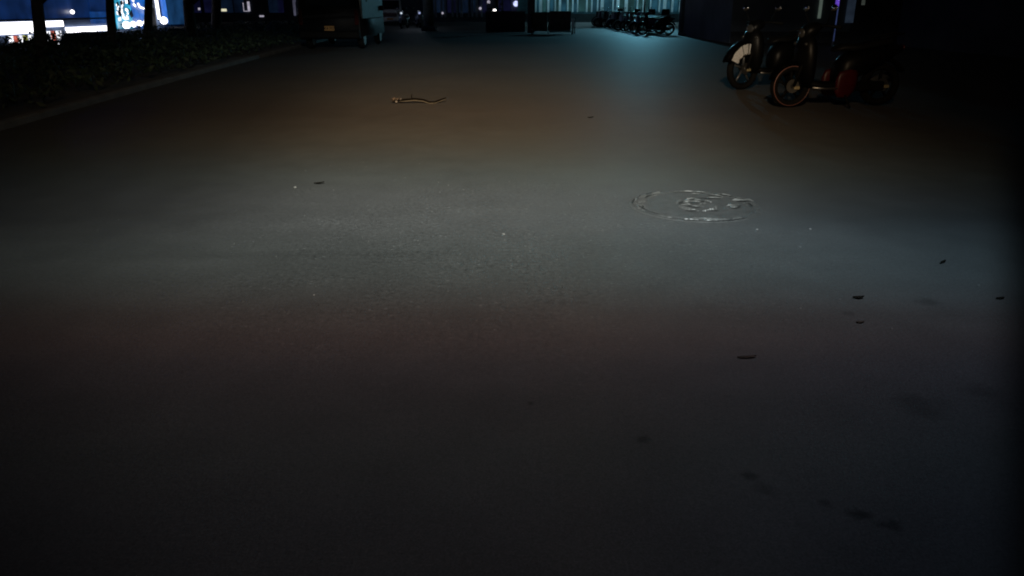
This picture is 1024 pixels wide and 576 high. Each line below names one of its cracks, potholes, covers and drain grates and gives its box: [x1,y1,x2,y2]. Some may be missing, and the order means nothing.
manhole cover [629,190,763,223]
